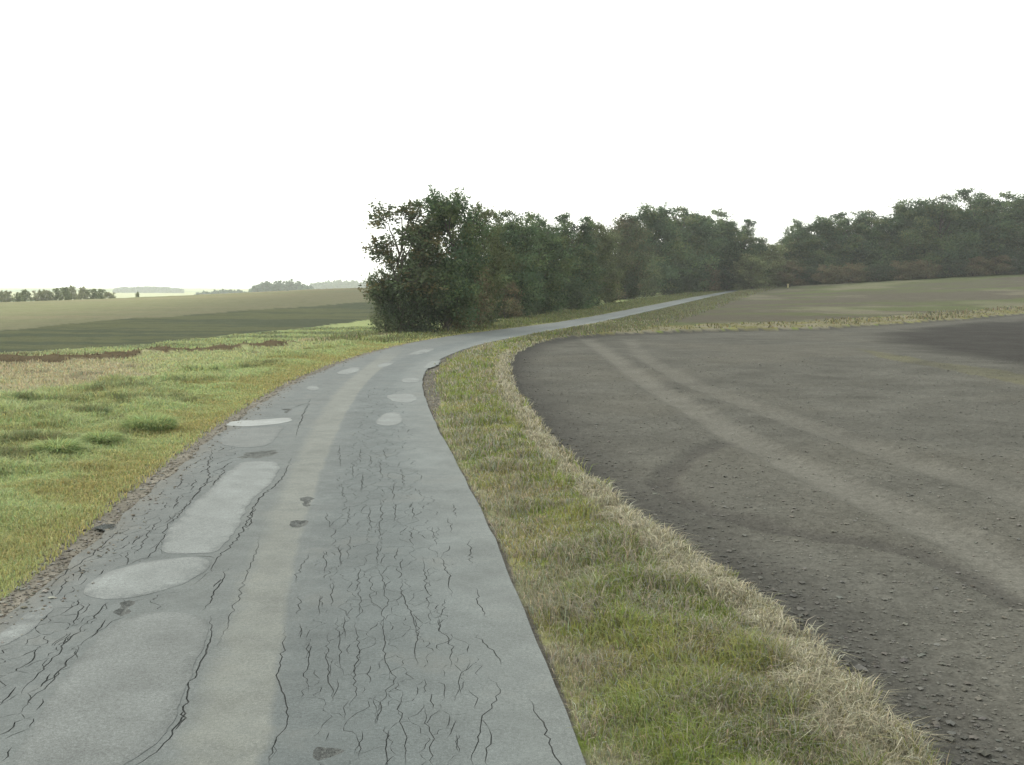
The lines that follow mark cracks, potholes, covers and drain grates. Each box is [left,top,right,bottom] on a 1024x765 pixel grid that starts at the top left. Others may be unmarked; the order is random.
pothole [313,747,345,761]
crack [268,388,501,765]
crack [136,458,292,765]
crack [0,426,251,762]
crack [529,699,562,765]
pothole [113,600,135,616]
pothole [237,450,278,459]
pothole [289,520,309,528]
